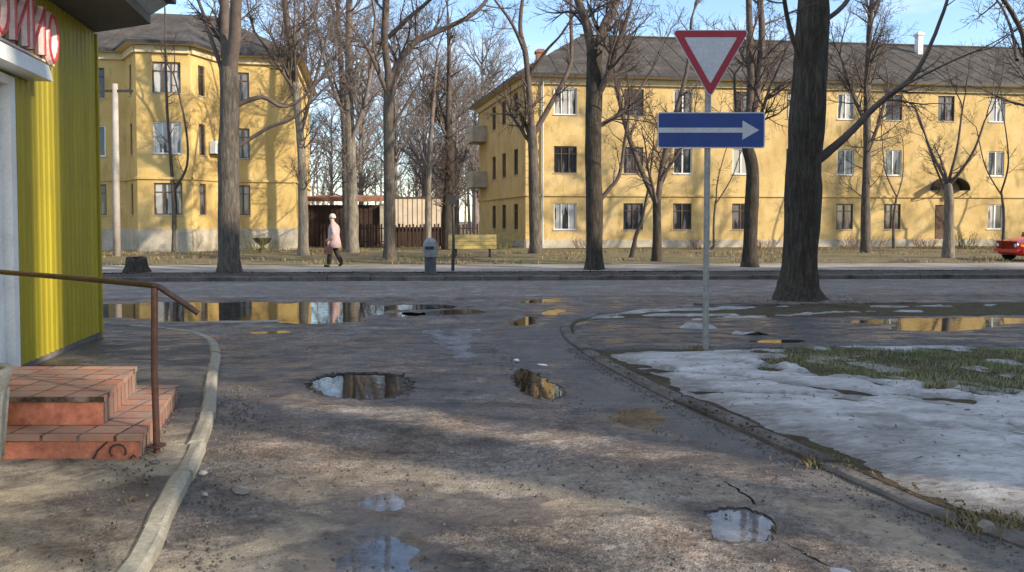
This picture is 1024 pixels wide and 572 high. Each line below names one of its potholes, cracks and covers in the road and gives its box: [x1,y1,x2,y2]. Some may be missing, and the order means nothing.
crack [789,545,836,572]
pothole [304,372,417,401]
pothole [510,368,567,400]
crack [725,481,756,505]
pothole [704,506,777,544]
